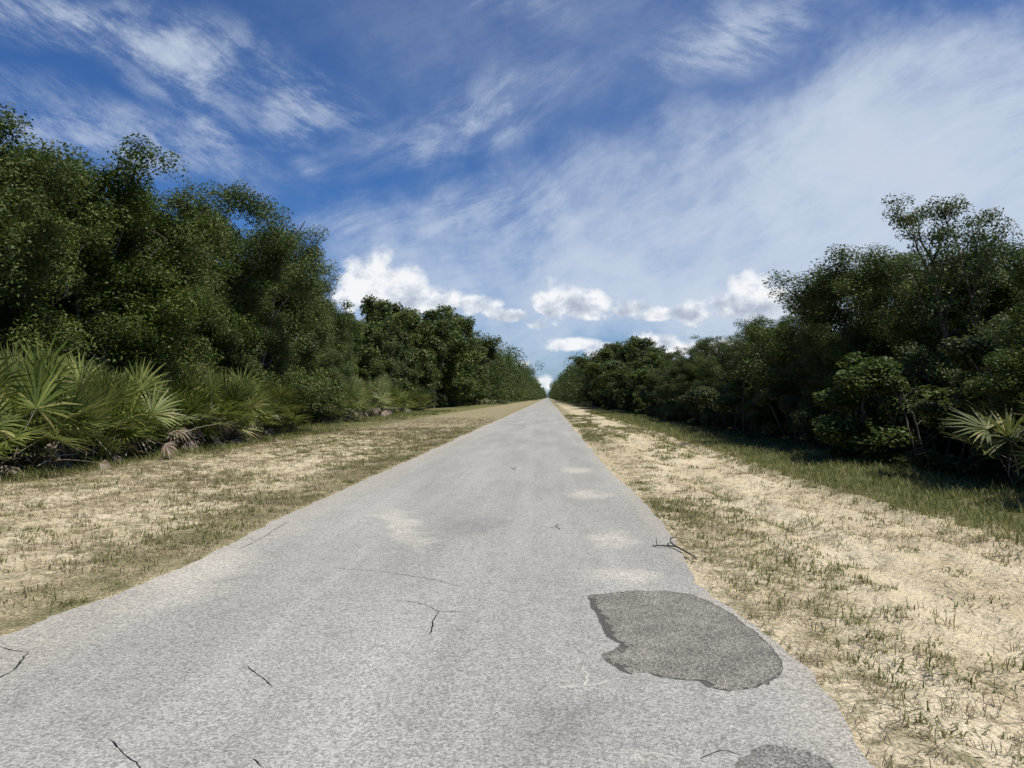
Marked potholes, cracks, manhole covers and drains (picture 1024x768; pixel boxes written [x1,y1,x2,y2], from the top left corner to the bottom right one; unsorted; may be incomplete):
crack [408,601,456,634]
crack [0,647,36,678]
crack [109,739,141,768]
crack [627,749,740,766]
